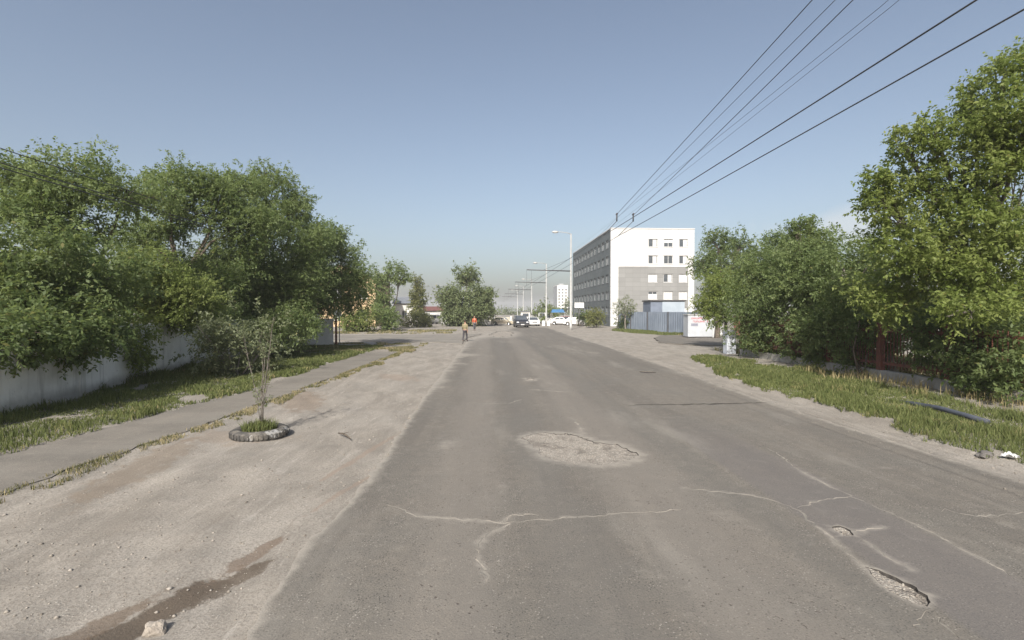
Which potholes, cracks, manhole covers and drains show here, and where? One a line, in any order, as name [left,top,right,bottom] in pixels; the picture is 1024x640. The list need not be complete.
pothole [832,526,853,536]
pothole [522,432,639,465]
crack [388,505,673,586]
pothole [866,567,930,606]
crack [692,445,1022,581]
